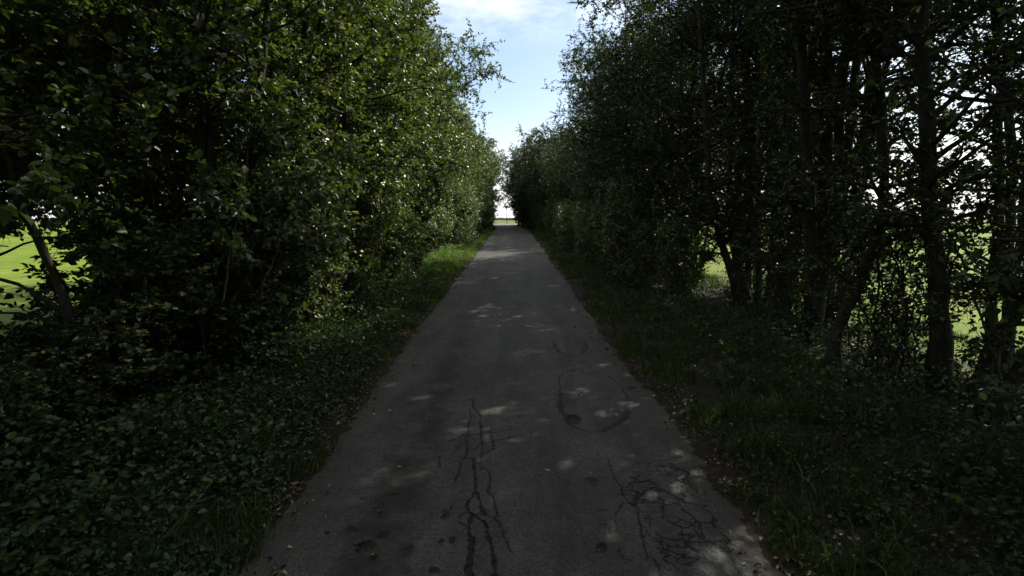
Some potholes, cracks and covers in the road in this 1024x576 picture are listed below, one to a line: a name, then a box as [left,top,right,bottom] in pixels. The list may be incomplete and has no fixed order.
crack [599,457,747,576]
crack [437,385,515,576]
